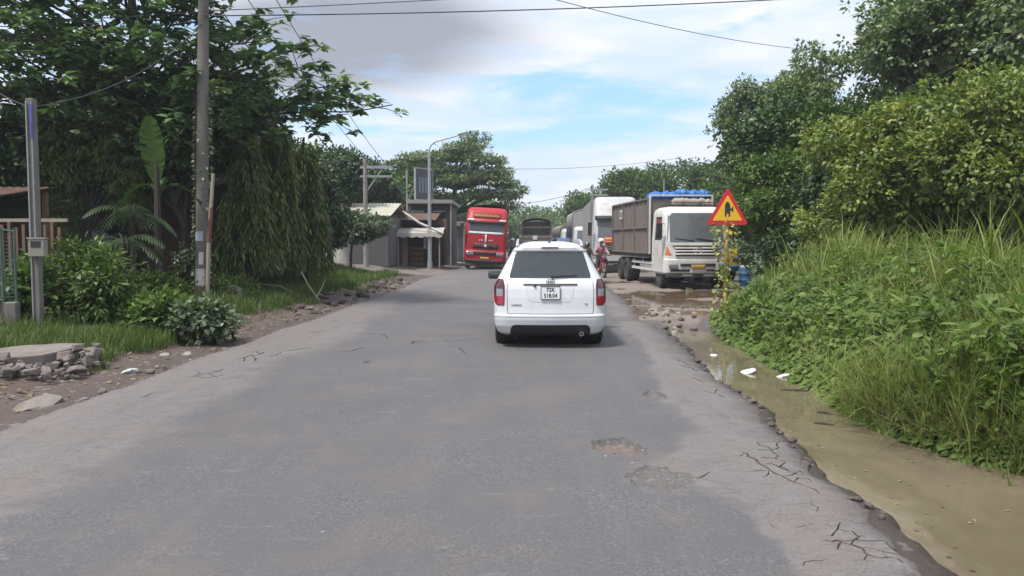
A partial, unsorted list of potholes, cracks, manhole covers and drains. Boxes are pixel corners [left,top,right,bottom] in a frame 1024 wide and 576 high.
crack [190,347,310,378]
pothole [624,464,698,493]
crack [737,441,903,566]
pothole [591,437,648,455]
pothole [643,389,667,400]
